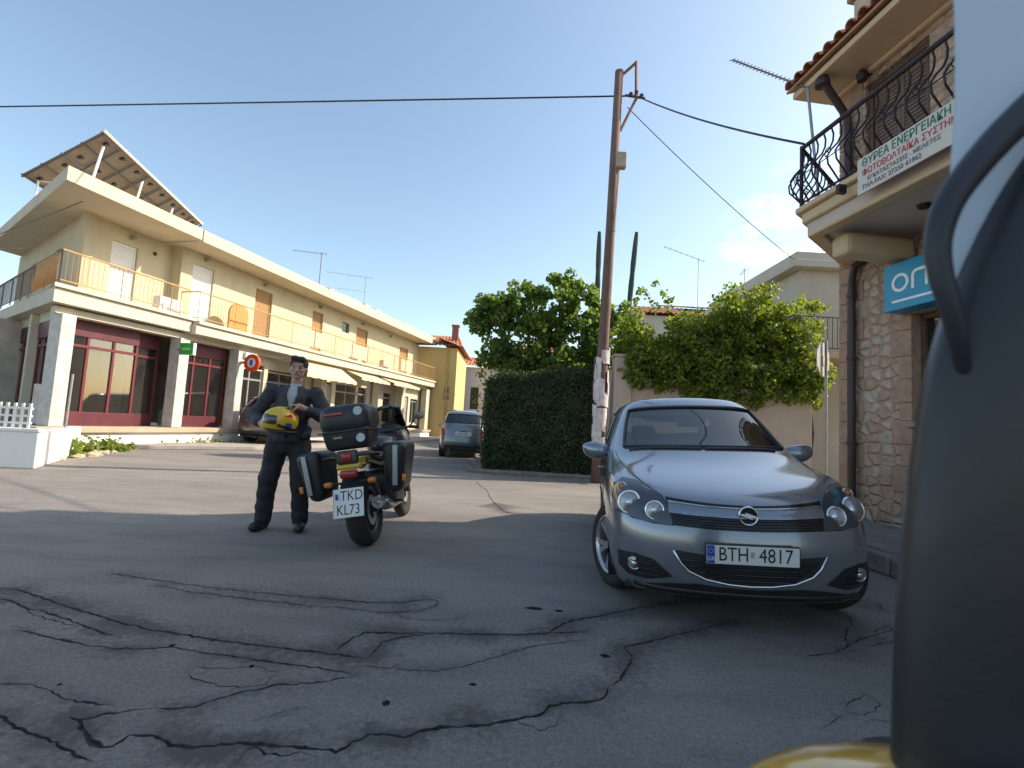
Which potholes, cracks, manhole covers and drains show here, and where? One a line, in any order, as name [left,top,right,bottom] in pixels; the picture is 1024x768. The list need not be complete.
crack [0,572,736,761]
crack [807,600,894,657]
crack [823,694,891,728]
